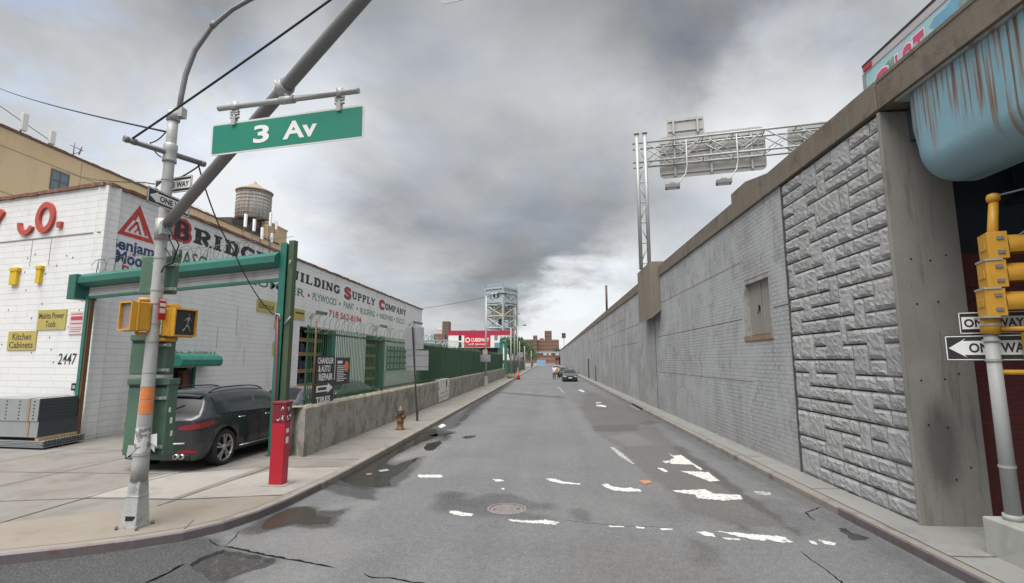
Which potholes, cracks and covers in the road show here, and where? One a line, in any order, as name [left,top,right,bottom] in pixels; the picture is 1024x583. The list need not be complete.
crack [209,532,335,568]
crack [146,564,184,583]
manhole cover [487,503,526,515]
crack [365,574,424,583]
